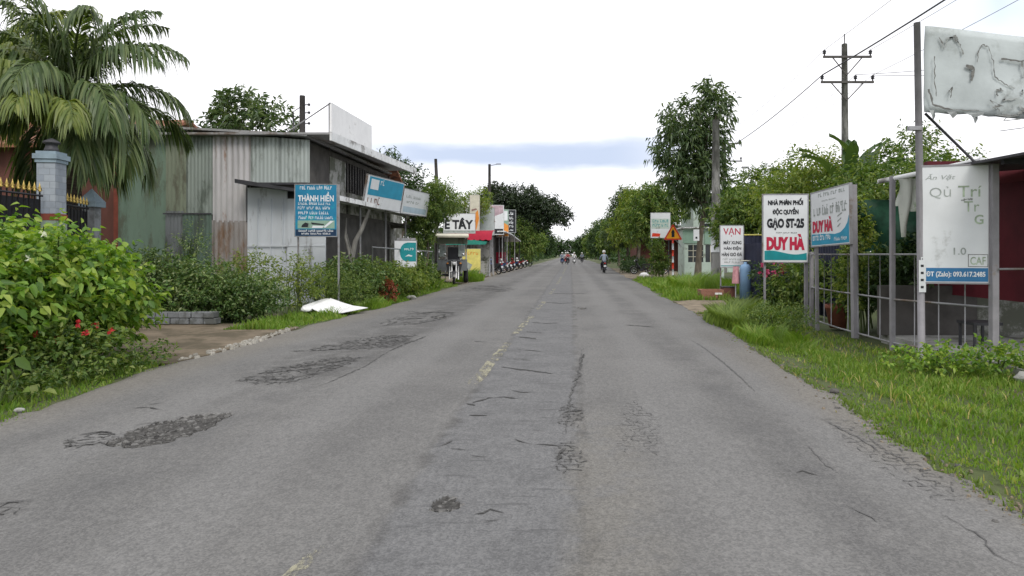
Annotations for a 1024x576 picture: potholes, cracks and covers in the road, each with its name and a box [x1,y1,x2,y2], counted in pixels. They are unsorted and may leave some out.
crack [508,322,548,373]
pothole [104,412,232,448]
pothole [429,496,465,513]
crack [516,347,588,473]
crack [617,401,660,453]
crack [948,517,1023,567]
crack [697,343,755,391]
crack [798,447,876,521]
crack [821,418,969,500]
